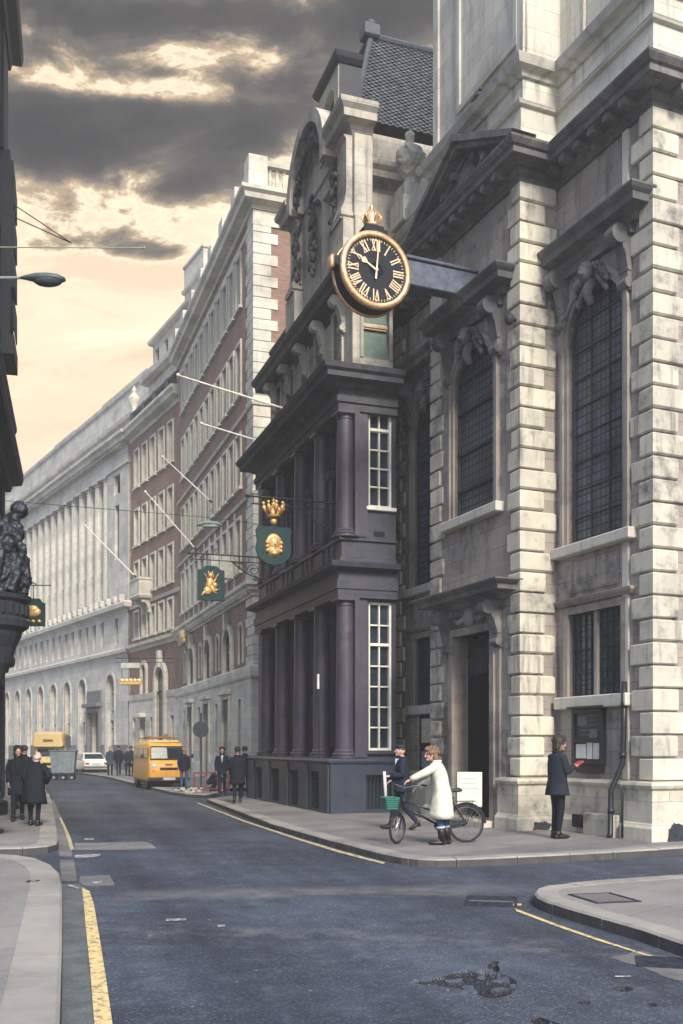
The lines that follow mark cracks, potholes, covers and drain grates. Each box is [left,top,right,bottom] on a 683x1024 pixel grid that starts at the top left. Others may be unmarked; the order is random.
pothole [487,961,500,972]
pothole [411,969,521,1000]
manhole cover [568,892,642,904]
manhole cover [464,895,517,907]
